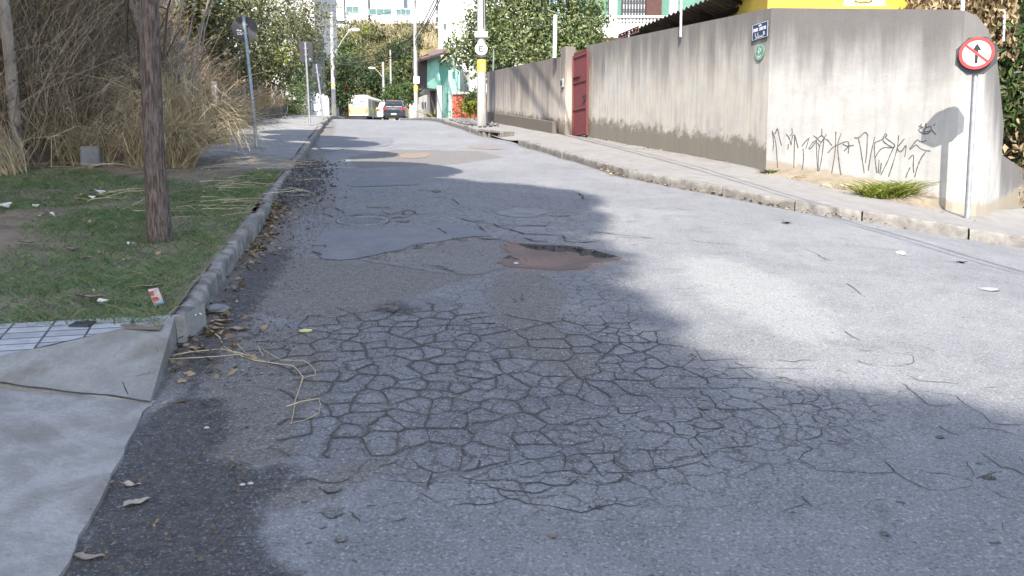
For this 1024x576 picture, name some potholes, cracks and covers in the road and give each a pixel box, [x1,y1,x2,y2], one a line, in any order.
drain grate [478,129,515,139]
pothole [498,240,623,270]
manhole cover [337,216,388,226]
crack [245,303,1024,522]
